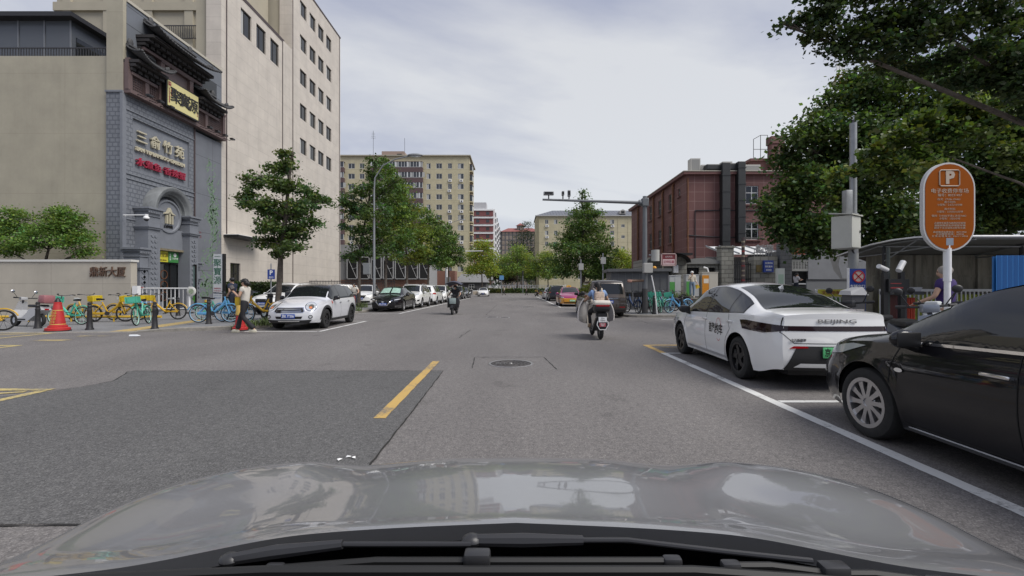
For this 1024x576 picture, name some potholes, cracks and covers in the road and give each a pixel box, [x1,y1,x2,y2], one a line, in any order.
manhole cover [488,360,534,368]
